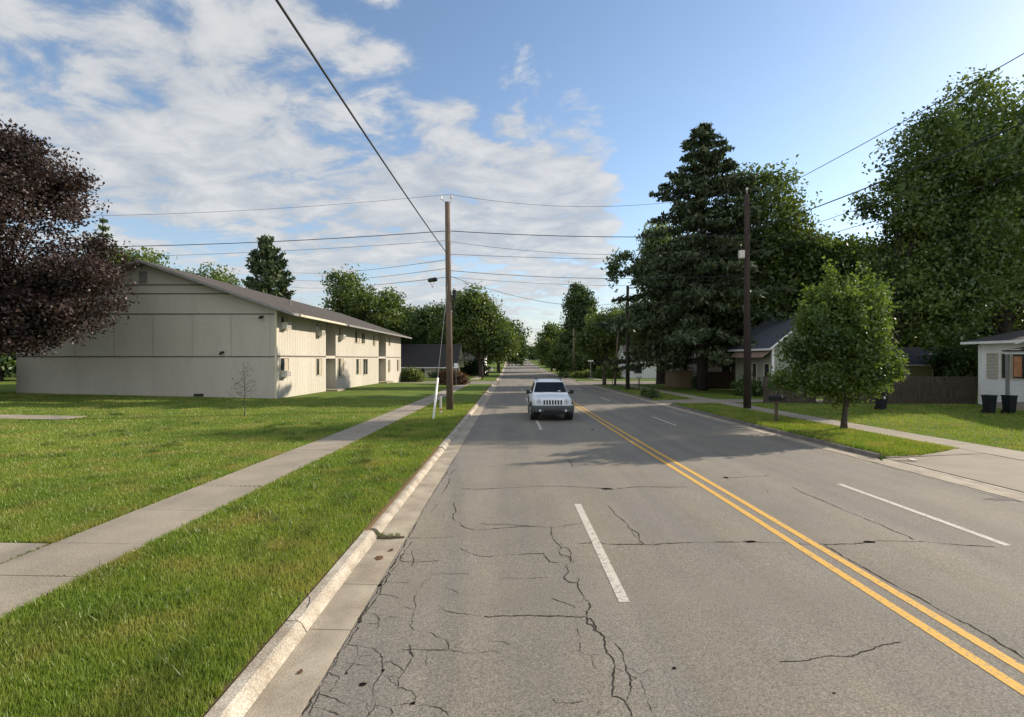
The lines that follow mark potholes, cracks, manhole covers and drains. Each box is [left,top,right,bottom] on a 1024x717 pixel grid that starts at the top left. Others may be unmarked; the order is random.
crack [302,471,993,716]
